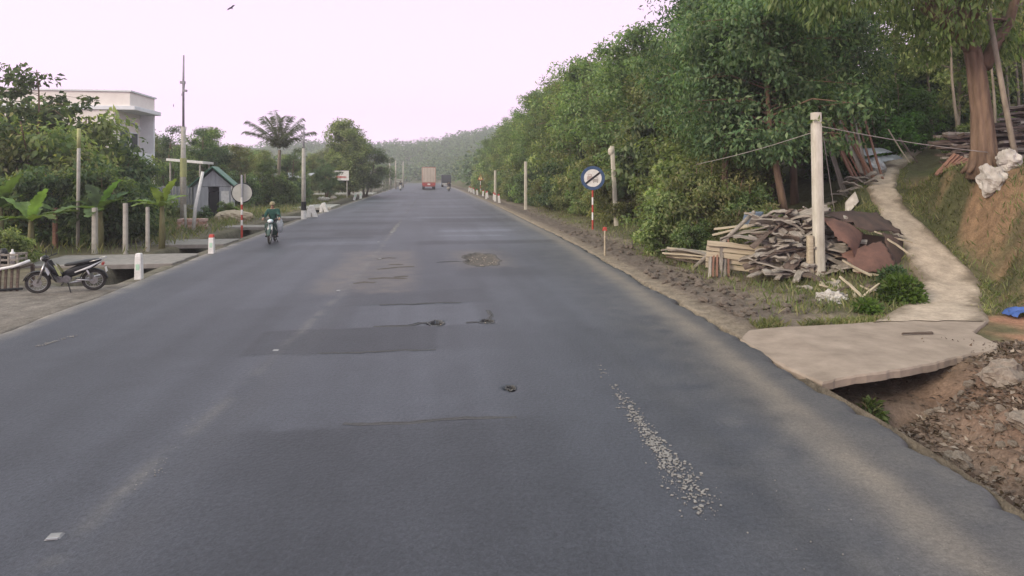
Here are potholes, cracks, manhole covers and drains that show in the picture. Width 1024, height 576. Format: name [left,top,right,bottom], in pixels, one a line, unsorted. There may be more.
pothole [461,252,502,267]
